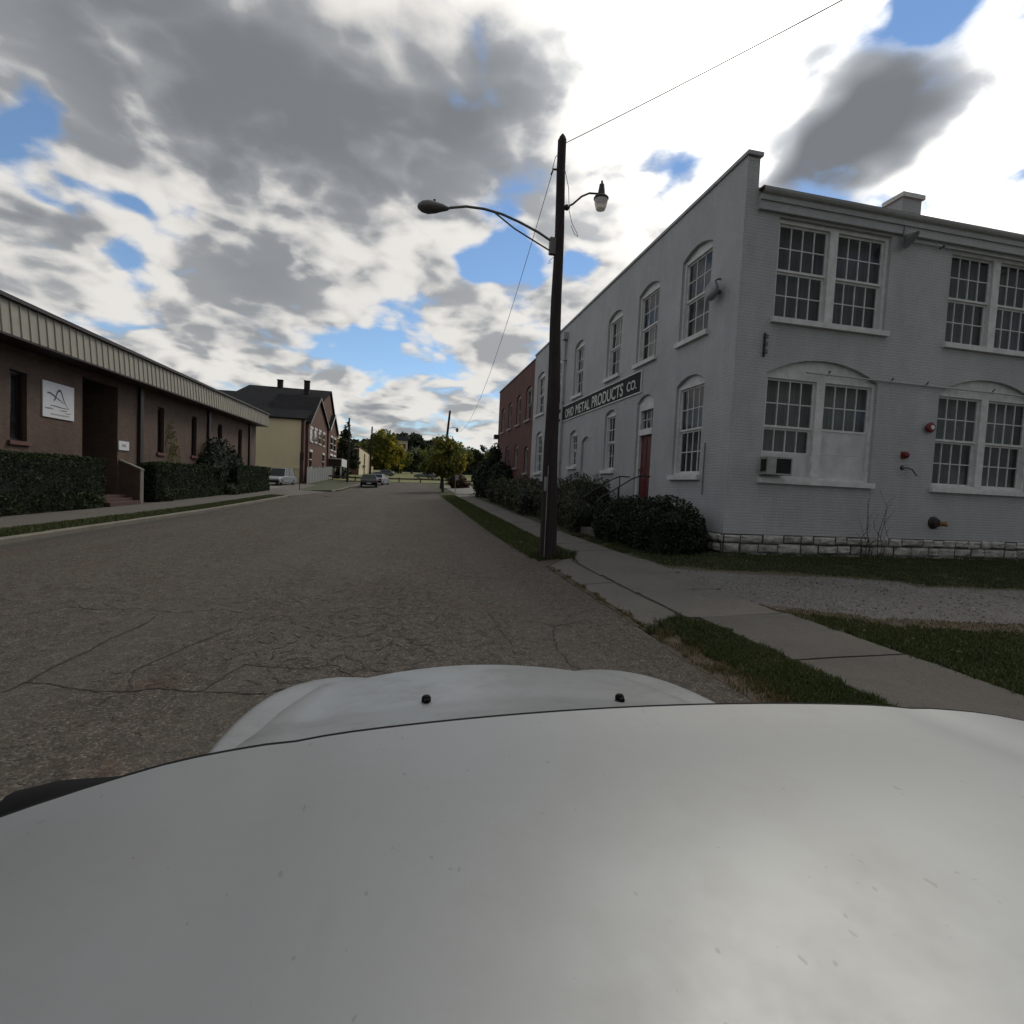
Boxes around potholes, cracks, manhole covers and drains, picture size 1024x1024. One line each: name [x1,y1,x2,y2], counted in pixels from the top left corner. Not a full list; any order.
crack [0,560,456,694]
crack [482,607,580,670]
